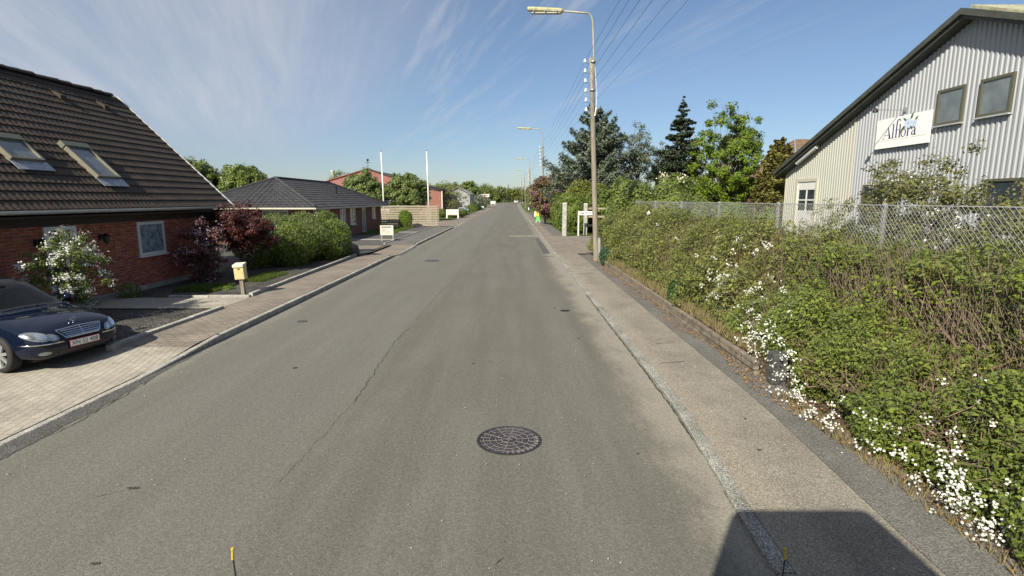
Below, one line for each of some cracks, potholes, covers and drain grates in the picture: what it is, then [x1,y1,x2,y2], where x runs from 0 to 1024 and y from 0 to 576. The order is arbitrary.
manhole cover [477,426,541,455]
crack [278,294,439,484]
